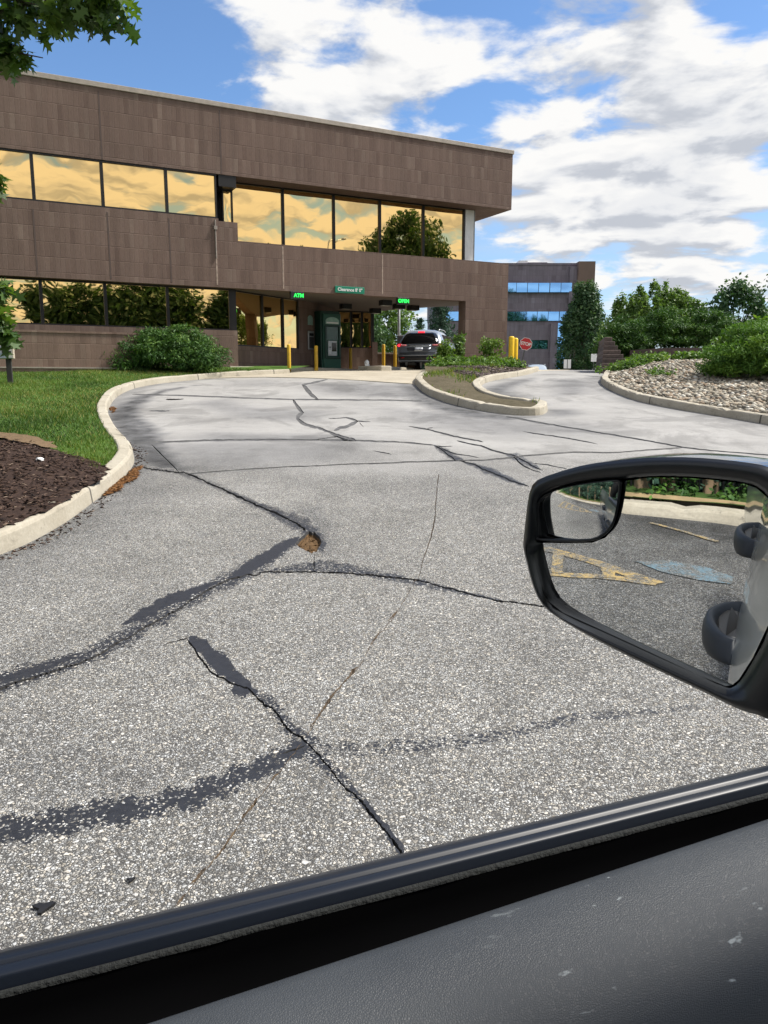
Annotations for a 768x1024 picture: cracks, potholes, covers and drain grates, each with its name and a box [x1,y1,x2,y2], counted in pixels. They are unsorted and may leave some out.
pothole [296,531,321,553]
crack [142,445,328,554]
crack [523,431,596,444]
crack [163,635,406,855]
